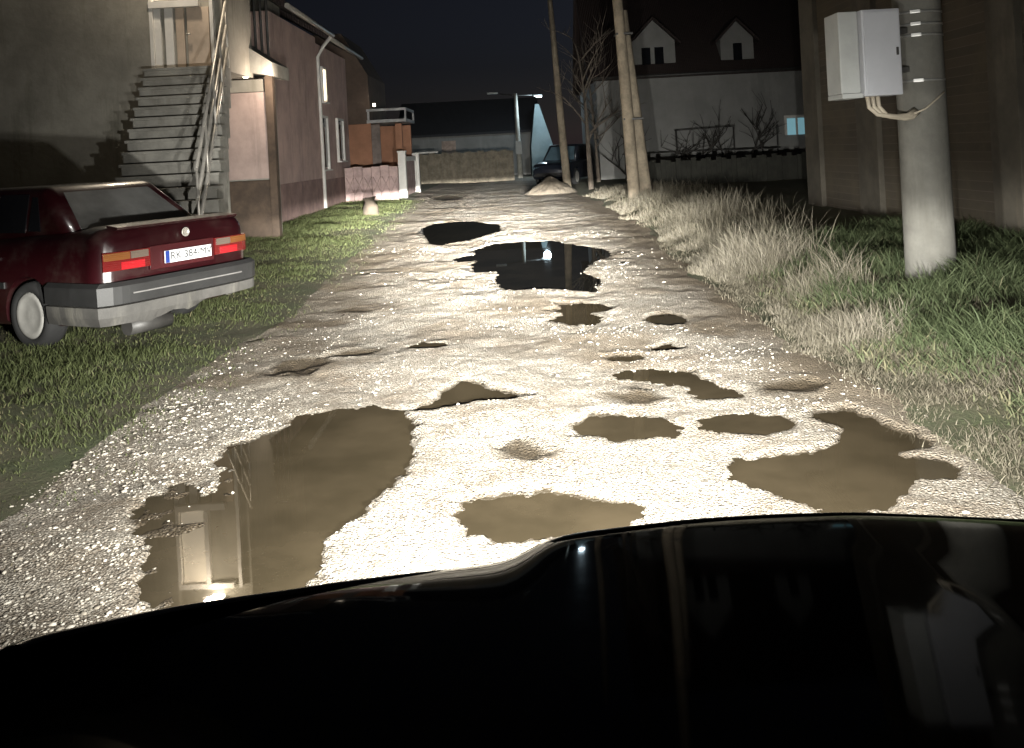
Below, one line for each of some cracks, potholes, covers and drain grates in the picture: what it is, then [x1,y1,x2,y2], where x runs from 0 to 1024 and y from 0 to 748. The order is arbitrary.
pothole [113,403,429,618]
pothole [744,374,838,397]
pothole [606,366,757,402]
pothole [447,239,621,294]
pothole [725,400,978,513]
pothole [689,410,809,437]
pothole [595,350,652,363]
pothole [434,477,663,547]
pothole [539,299,622,328]
pothole [389,374,542,416]
pothole [413,220,509,246]
pothole [636,310,694,326]
